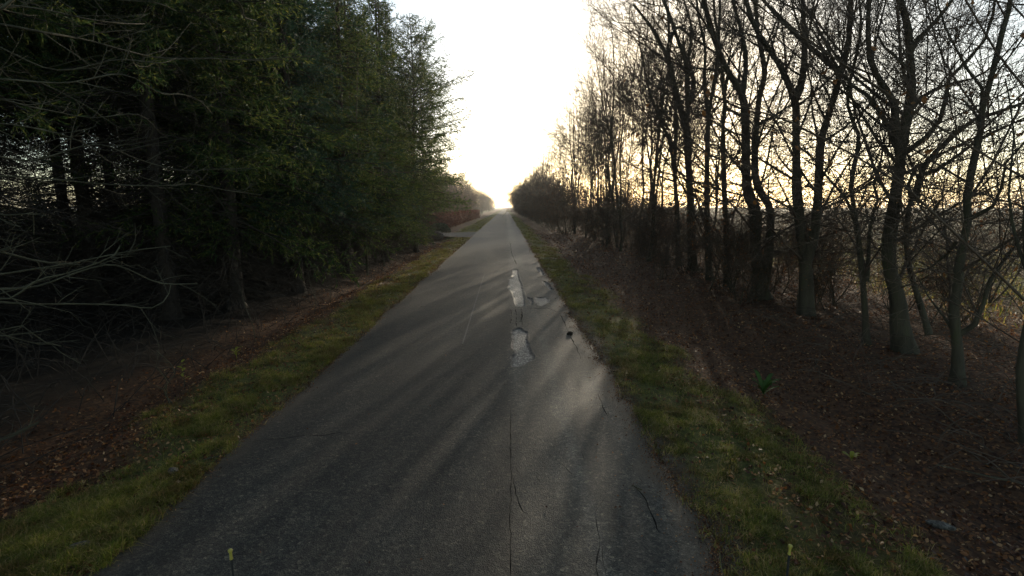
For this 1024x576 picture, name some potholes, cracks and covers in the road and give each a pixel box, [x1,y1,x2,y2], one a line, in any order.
pothole [510,327,535,367]
pothole [534,296,550,306]
crack [509,410,528,576]
pothole [507,269,526,307]
crack [596,501,607,576]
